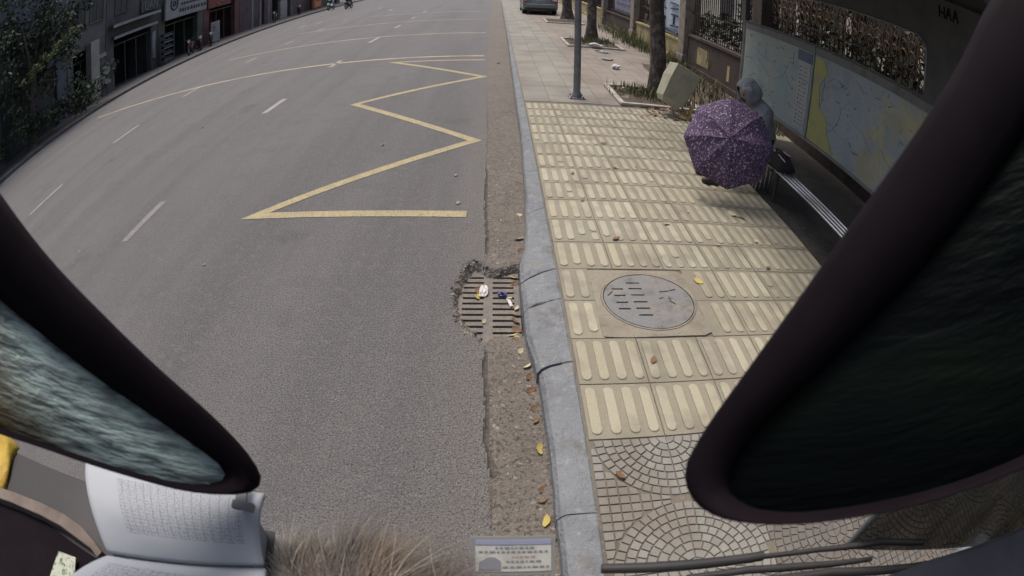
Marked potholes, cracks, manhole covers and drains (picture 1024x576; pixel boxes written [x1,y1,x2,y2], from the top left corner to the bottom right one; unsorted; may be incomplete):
manhole cover [601,274,696,331]
drain grate [457,272,523,345]
